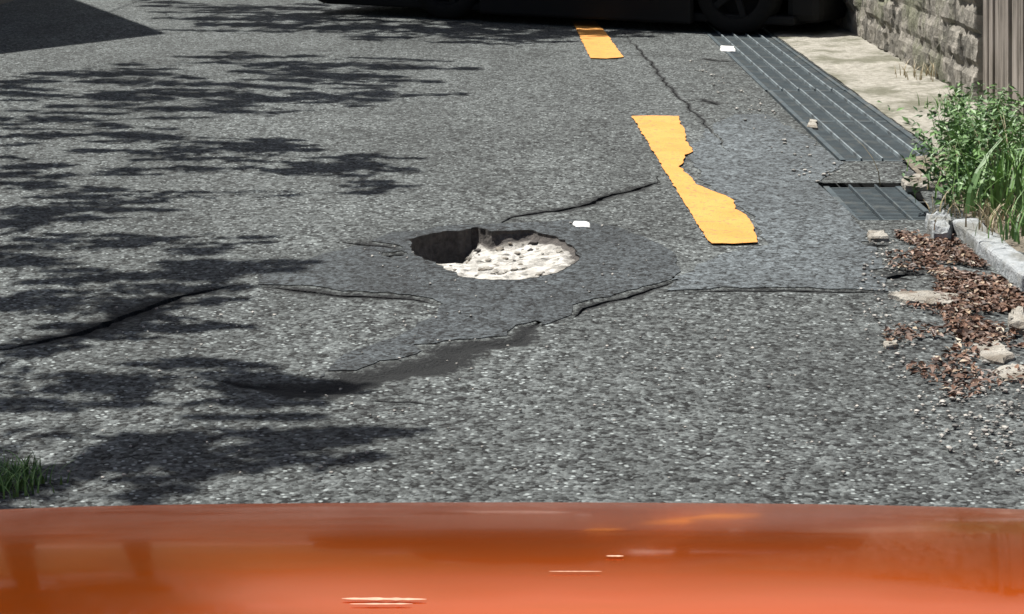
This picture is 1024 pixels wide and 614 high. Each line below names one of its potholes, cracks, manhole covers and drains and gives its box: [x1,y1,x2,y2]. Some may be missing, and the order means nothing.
crack [568,269,925,319]
crack [494,176,666,224]
drain grate [720,45,814,67]
drain grate [740,65,847,92]
drain grate [823,184,931,220]
drain grate [702,28,787,47]
drain grate [767,89,890,123]
